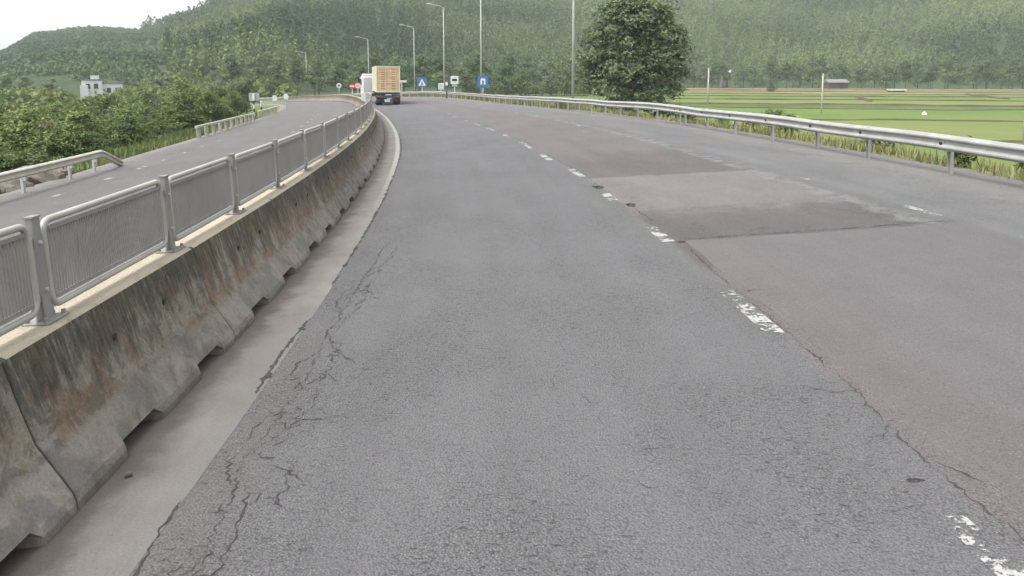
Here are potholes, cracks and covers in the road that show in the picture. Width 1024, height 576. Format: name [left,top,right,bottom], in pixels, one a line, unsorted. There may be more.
crack [168,241,395,576]
crack [684,220,1024,540]
